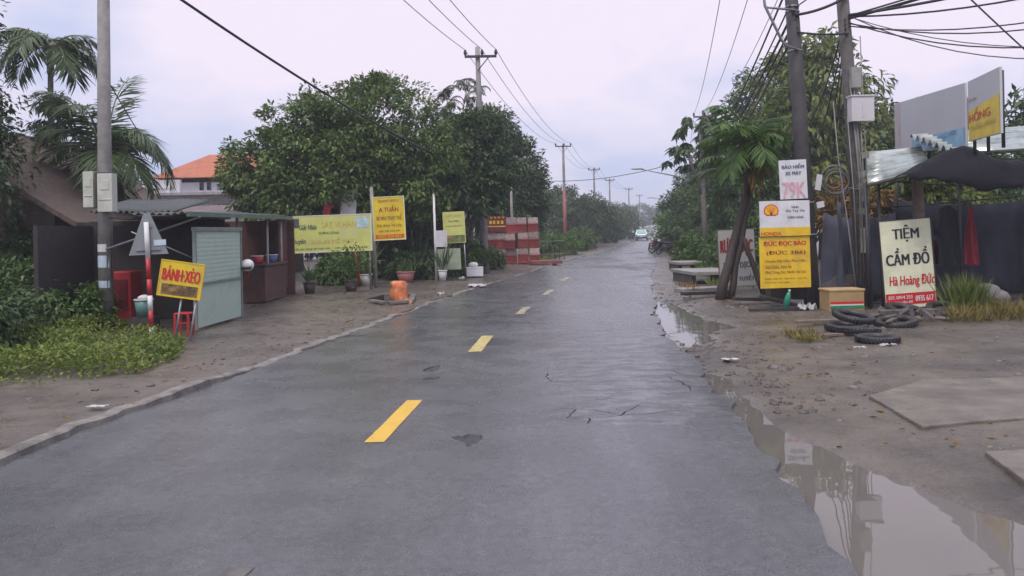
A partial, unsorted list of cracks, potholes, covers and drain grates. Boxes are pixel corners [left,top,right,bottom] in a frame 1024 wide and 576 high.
pothole [451,434,483,447]
crack [545,367,691,424]
